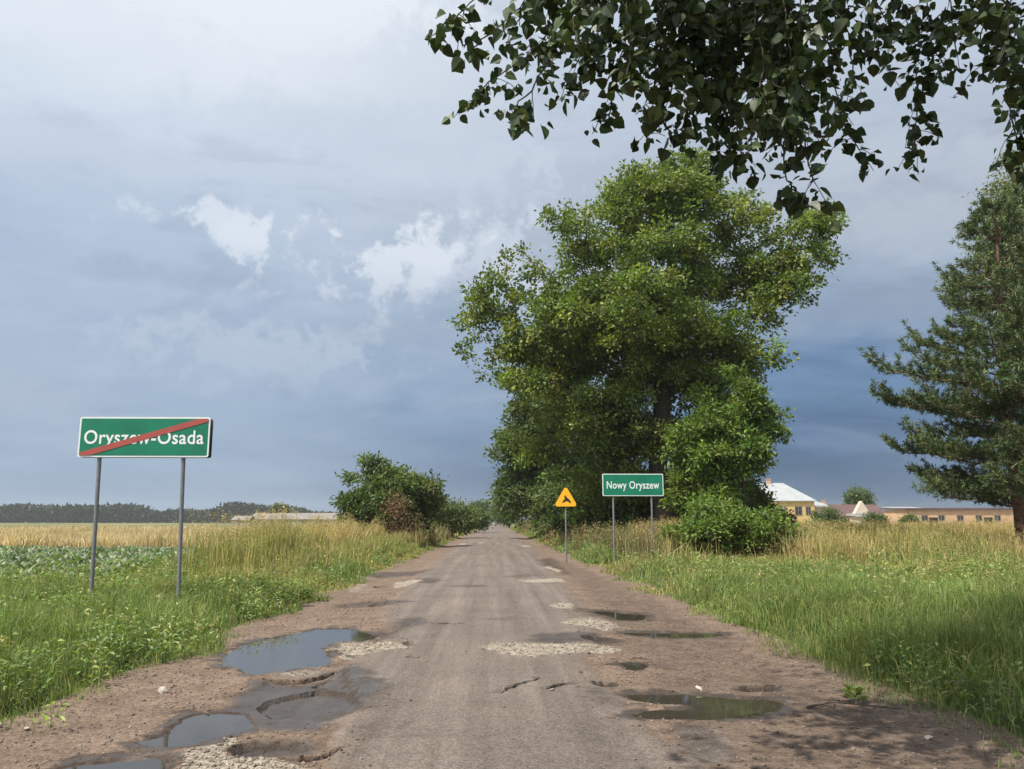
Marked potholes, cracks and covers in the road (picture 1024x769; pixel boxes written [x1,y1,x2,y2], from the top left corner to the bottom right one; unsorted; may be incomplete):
pothole [619,691,792,721]
pothole [129,710,262,748]
pothole [216,627,381,675]
pothole [590,610,650,621]
crack [502,679,573,693]
pothole [256,691,354,720]
pothole [615,659,654,671]
